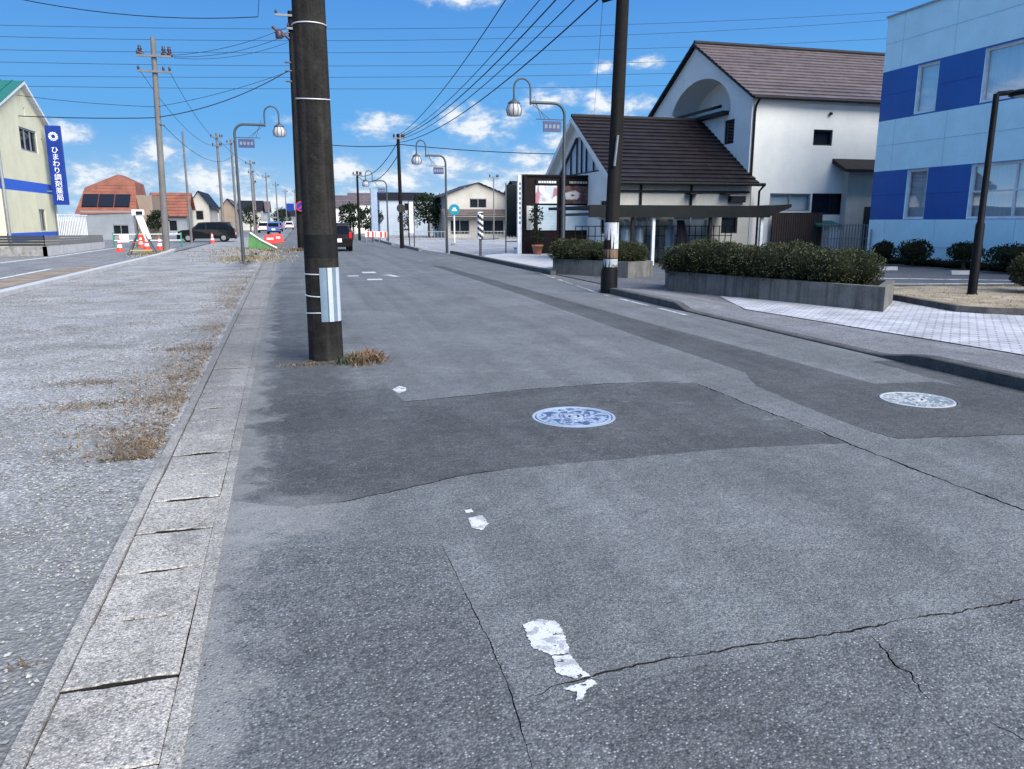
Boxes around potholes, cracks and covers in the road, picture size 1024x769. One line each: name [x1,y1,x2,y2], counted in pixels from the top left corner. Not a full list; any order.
manhole cover [532,407,616,427]
crack [444,551,1024,769]
manhole cover [875,391,961,409]
